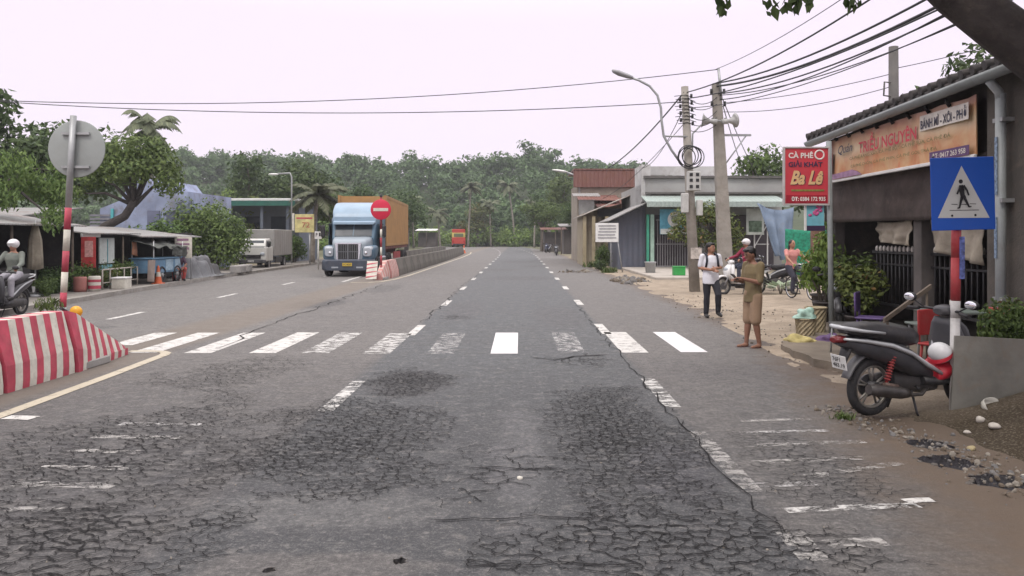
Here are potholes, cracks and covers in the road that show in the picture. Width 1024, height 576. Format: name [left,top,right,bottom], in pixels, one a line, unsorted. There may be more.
crack [134,355,312,393]
pothole [965,471,1024,491]
pothole [903,439,959,450]
crack [186,396,462,503]
crack [0,389,309,576]
crack [432,307,937,576]
pothole [913,452,992,471]
